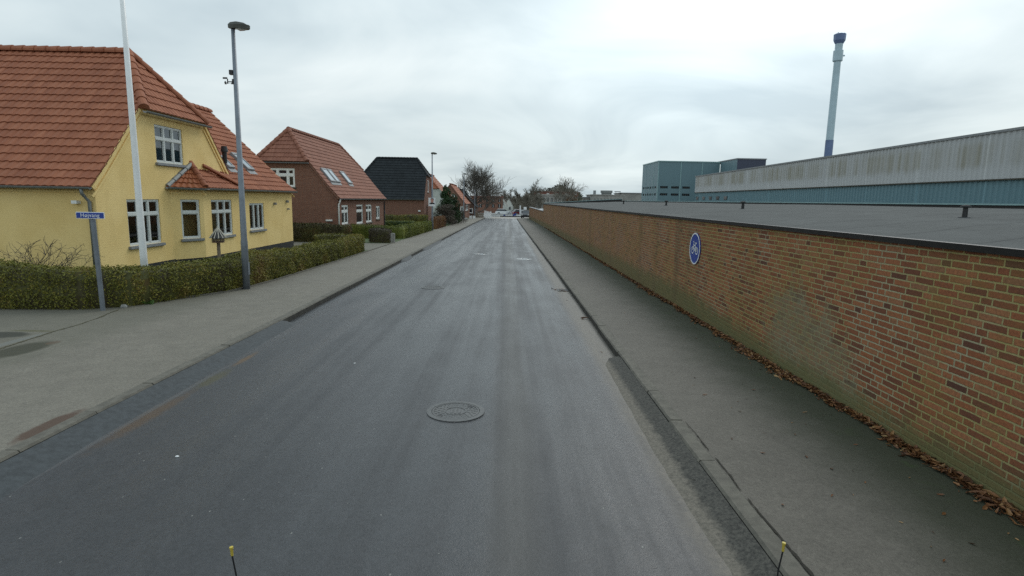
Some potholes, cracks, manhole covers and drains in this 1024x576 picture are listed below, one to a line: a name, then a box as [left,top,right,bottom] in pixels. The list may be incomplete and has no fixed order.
manhole cover [427,401,485,422]
